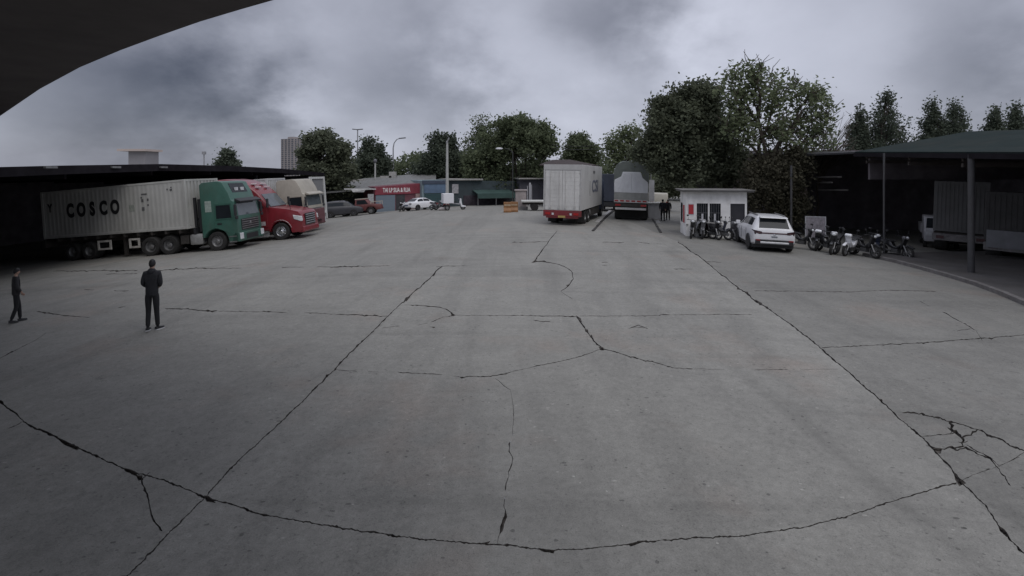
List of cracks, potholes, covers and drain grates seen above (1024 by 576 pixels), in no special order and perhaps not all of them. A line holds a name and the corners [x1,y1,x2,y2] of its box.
crack [532,230,574,297]
crack [903,411,1024,486]
crack [386,305,455,328]
crack [336,316,787,545]
crack [123,468,162,531]
